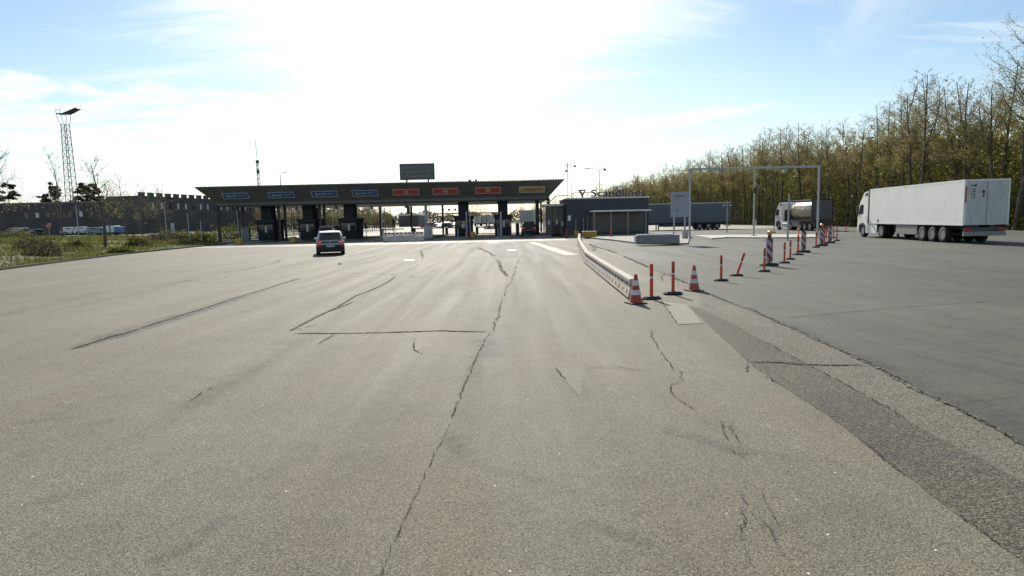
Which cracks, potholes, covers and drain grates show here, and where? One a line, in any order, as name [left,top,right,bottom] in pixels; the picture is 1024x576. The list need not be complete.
crack [732,476,780,565]
crack [480,248,507,276]
crack [586,333,698,412]
crack [291,264,517,575]
